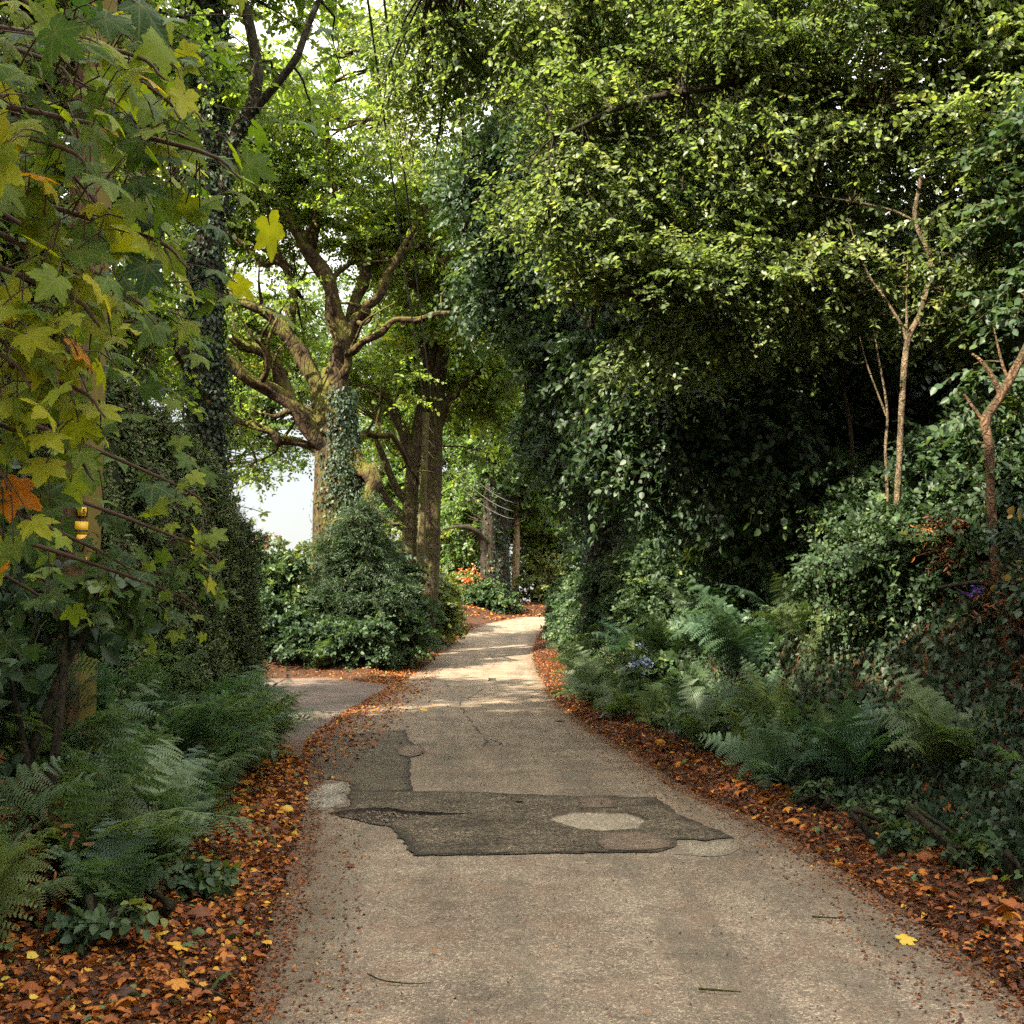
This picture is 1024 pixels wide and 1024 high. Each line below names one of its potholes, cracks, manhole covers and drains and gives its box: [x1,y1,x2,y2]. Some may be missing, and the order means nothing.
crack [460,689,504,750]
